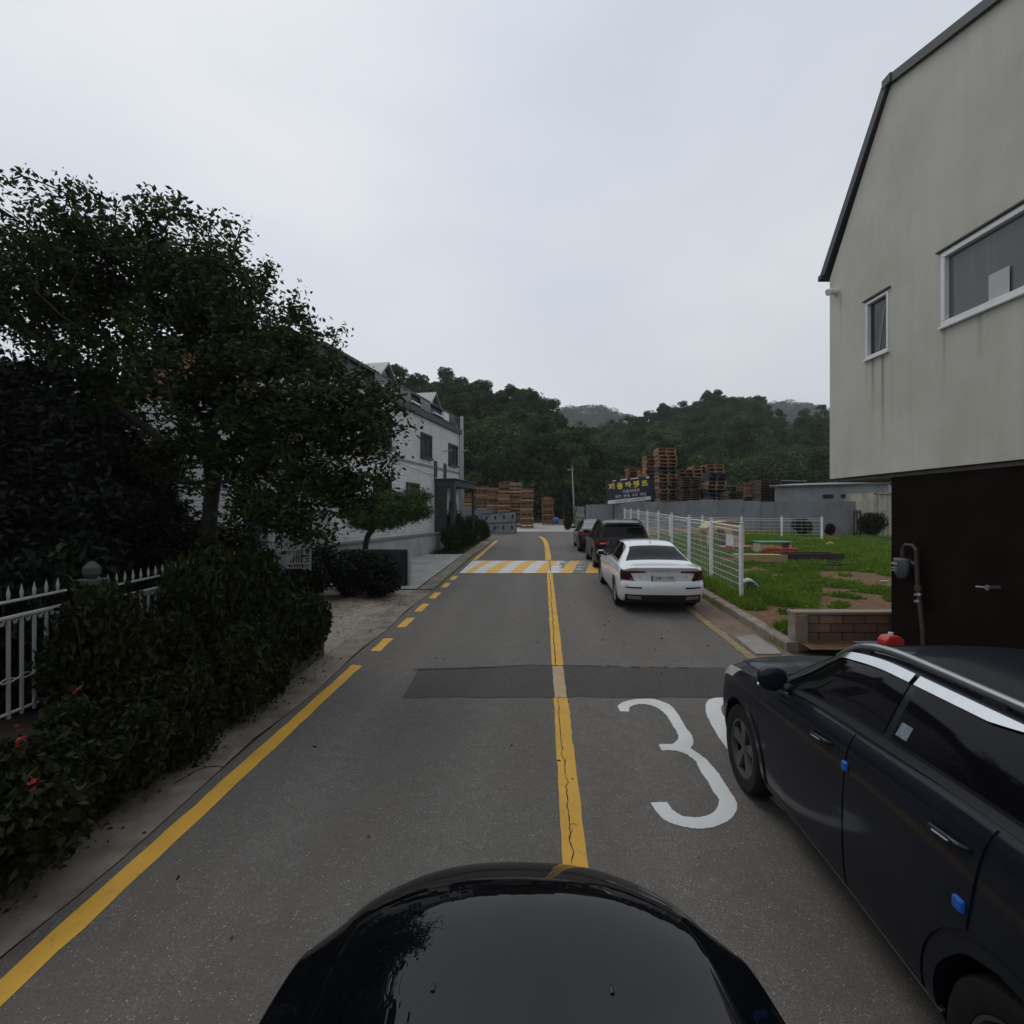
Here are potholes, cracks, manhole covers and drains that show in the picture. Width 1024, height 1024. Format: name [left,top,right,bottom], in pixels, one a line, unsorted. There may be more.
crack [557,700,575,864]
